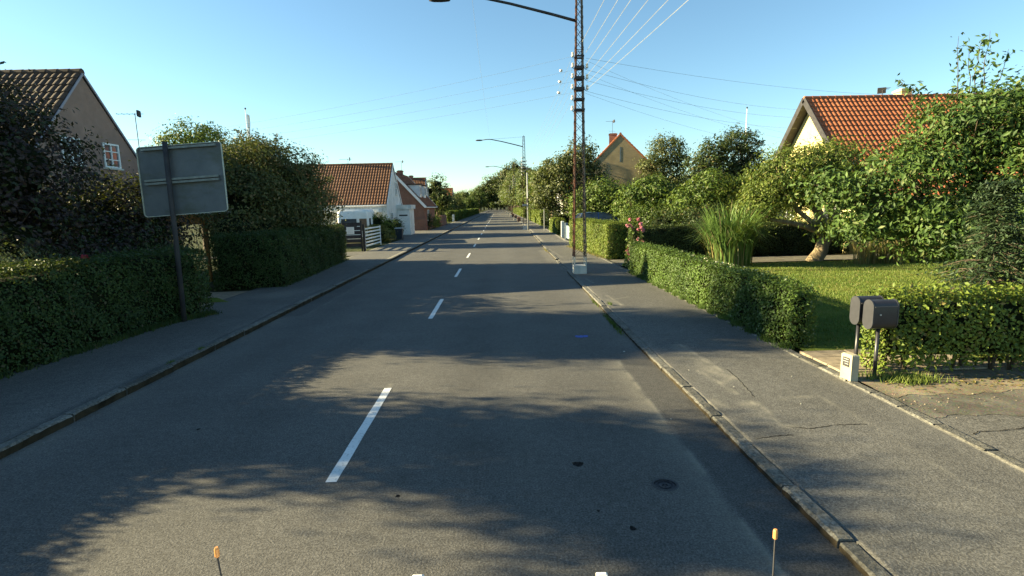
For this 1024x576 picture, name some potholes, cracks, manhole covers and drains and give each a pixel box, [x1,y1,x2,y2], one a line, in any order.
manhole cover [651,478,679,491]
